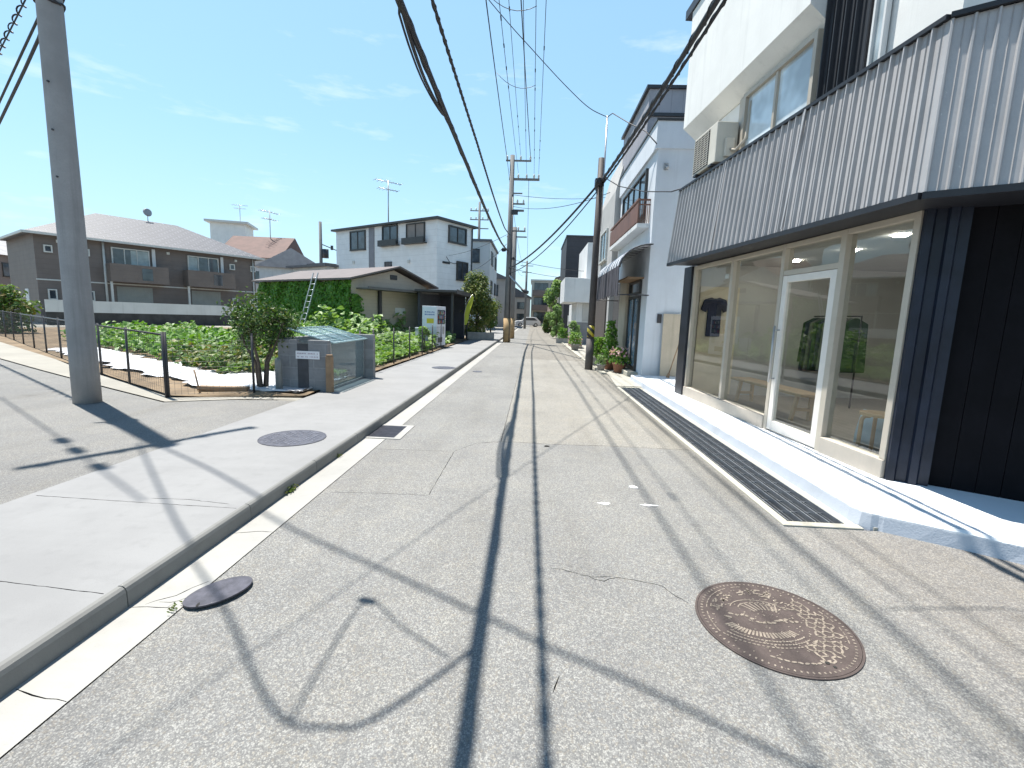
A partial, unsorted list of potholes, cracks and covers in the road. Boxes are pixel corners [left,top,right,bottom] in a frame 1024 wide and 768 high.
drain grate [364,424,414,444]
crack [16,689,67,706]
manhole cover [695,582,866,681]
crack [129,582,206,612]
manhole cover [257,430,327,447]
drain grate [616,386,864,530]
manhole cover [182,576,253,609]
crack [554,568,686,602]
